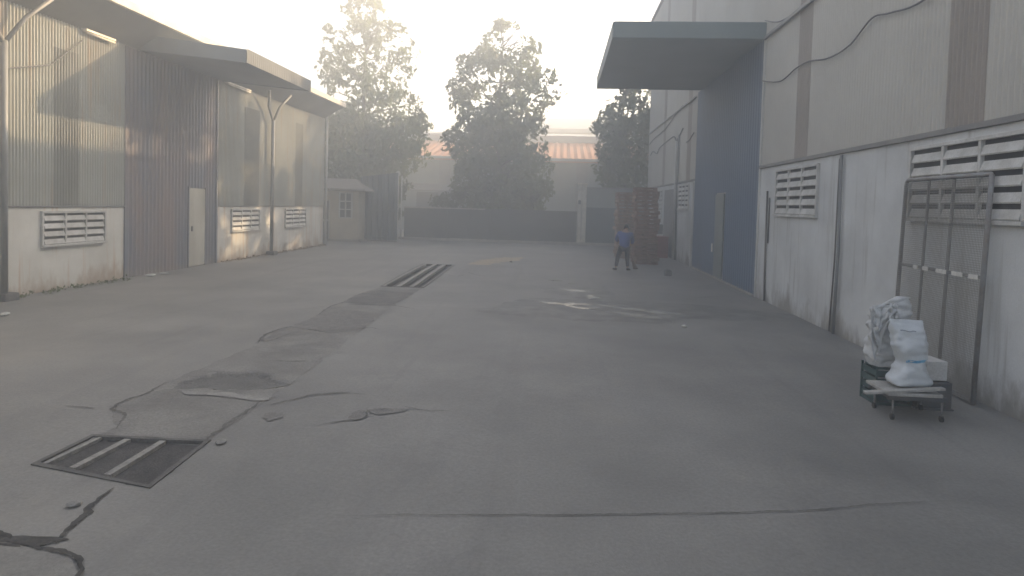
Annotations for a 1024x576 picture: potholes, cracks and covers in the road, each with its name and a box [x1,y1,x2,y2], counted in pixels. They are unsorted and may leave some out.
drain grate [31,434,211,489]
drain grate [381,264,454,288]
crack [201,392,368,448]
crack [0,488,113,576]
